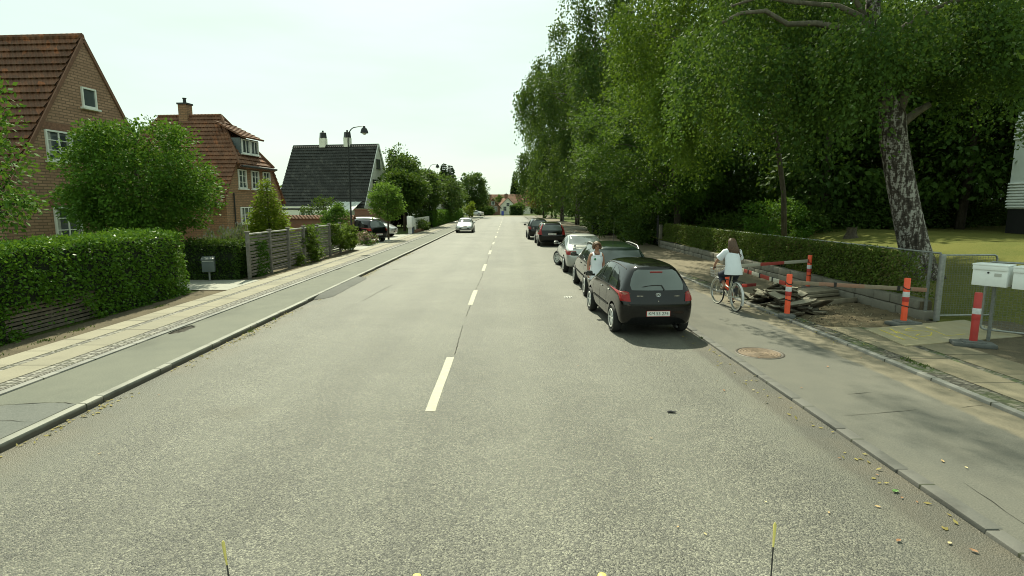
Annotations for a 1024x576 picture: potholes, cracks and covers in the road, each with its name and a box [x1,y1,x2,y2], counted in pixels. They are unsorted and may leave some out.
manhole cover [734,347,785,359]
